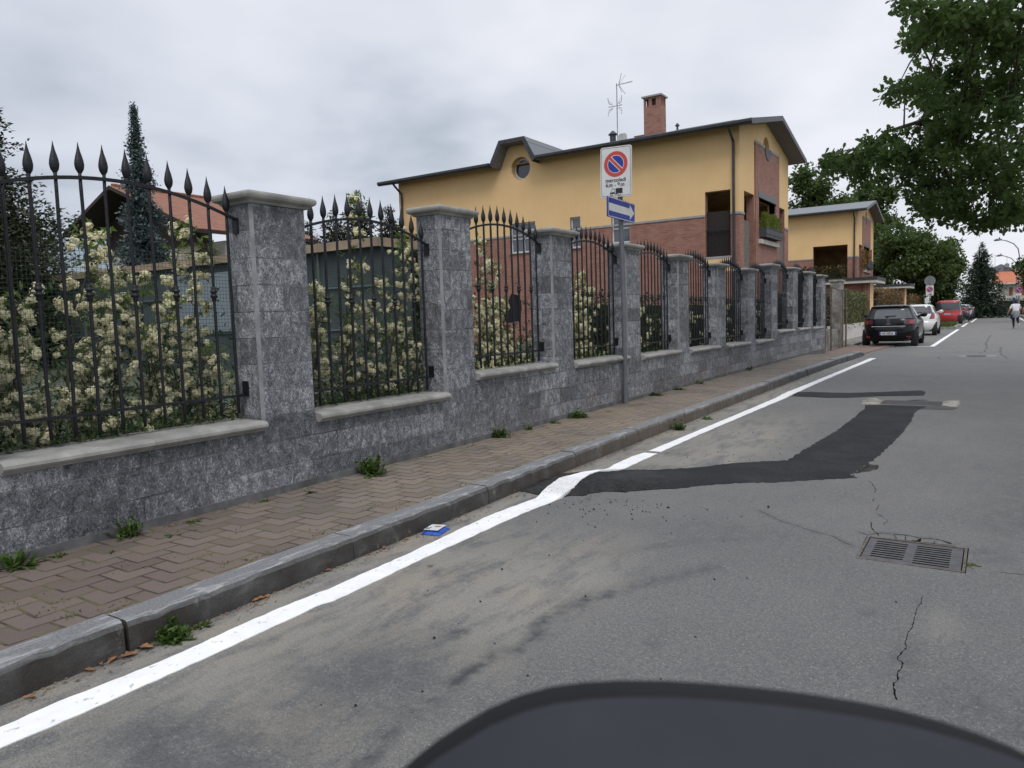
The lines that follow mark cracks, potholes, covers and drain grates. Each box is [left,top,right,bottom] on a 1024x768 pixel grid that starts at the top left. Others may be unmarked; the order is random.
crack [853,475,951,546]
crack [893,596,923,700]
drain grate [856,536,968,573]
